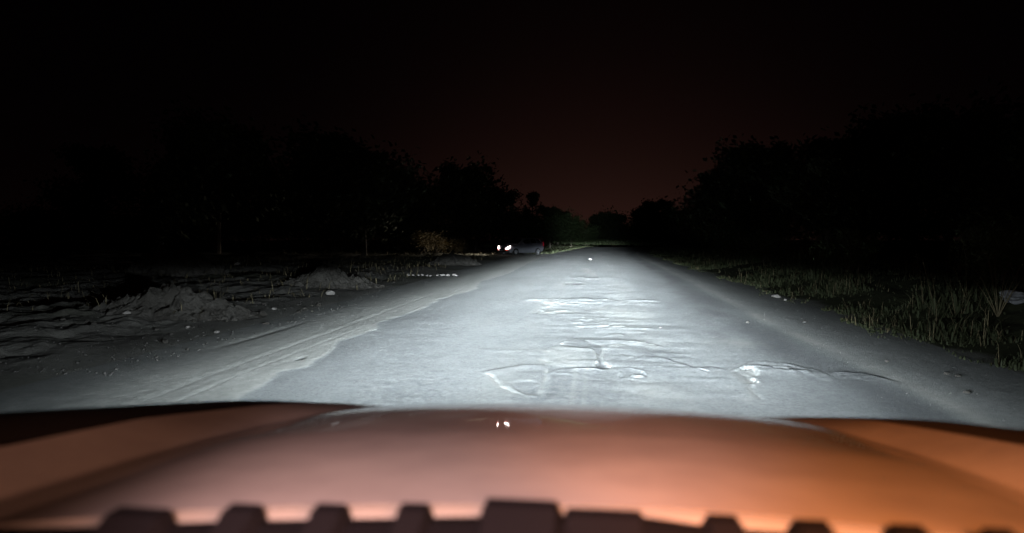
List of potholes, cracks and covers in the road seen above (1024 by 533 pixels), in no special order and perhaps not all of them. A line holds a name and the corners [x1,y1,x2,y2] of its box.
pothole [561,339,614,369]
pothole [524,298,623,314]
pothole [508,379,542,395]
pothole [729,365,767,405]
pothole [616,367,648,378]
crack [481,316,913,400]
